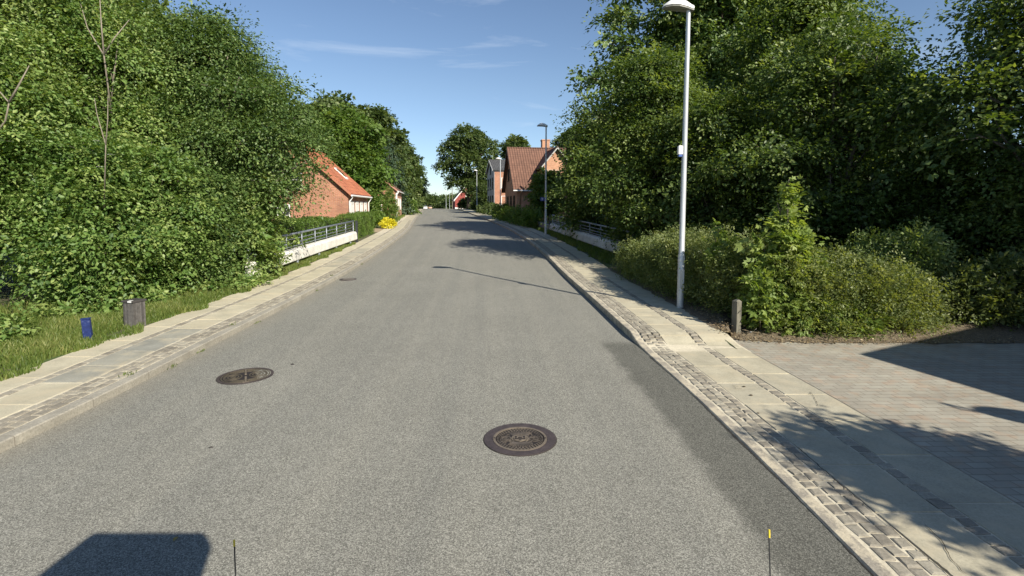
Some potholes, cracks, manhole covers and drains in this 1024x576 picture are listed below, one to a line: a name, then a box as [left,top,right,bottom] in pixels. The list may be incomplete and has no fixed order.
manhole cover [483,423,557,456]
manhole cover [216,368,274,385]
